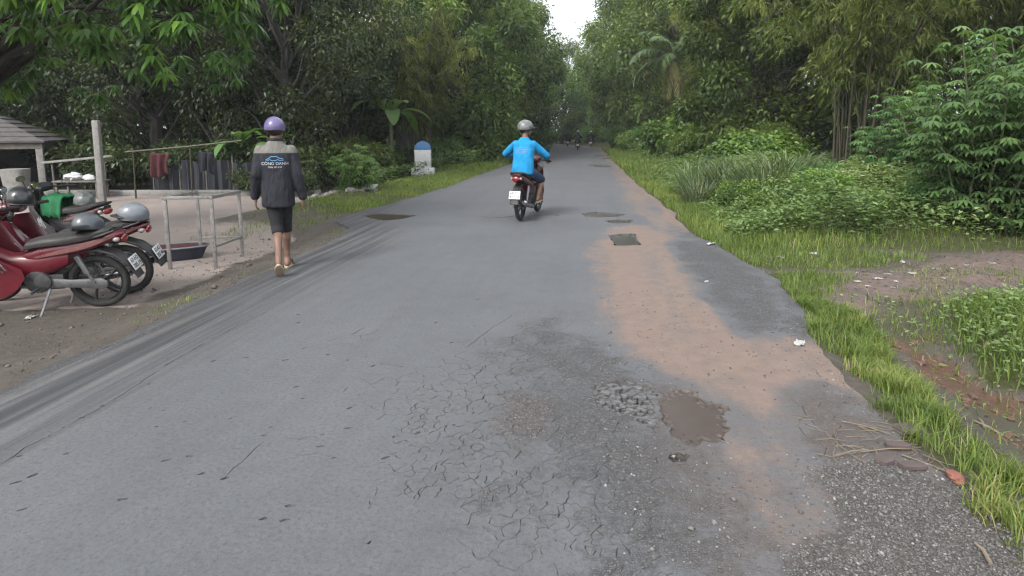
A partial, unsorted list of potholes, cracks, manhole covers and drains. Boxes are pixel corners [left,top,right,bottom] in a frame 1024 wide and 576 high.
pothole [656,389,731,446]
pothole [607,233,641,246]
pothole [591,379,664,425]
